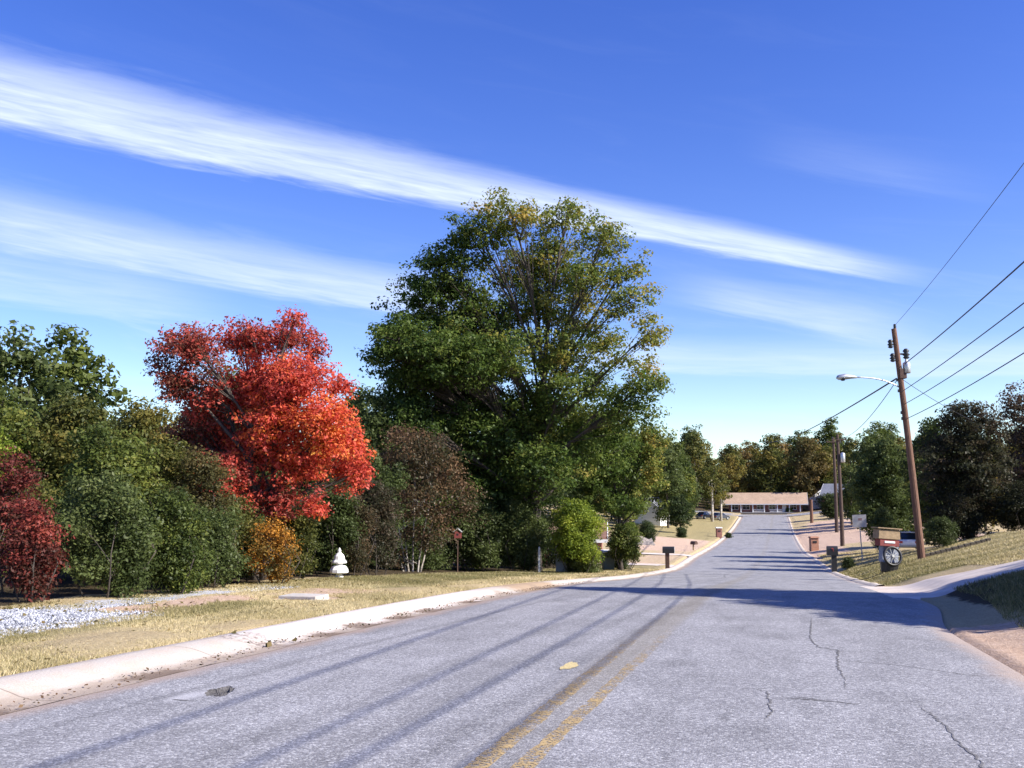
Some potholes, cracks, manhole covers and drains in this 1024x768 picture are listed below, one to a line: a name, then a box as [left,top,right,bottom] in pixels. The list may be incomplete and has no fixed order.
crack [791,622,1000,704]
crack [921,708,984,768]
pothole [205,686,235,697]
